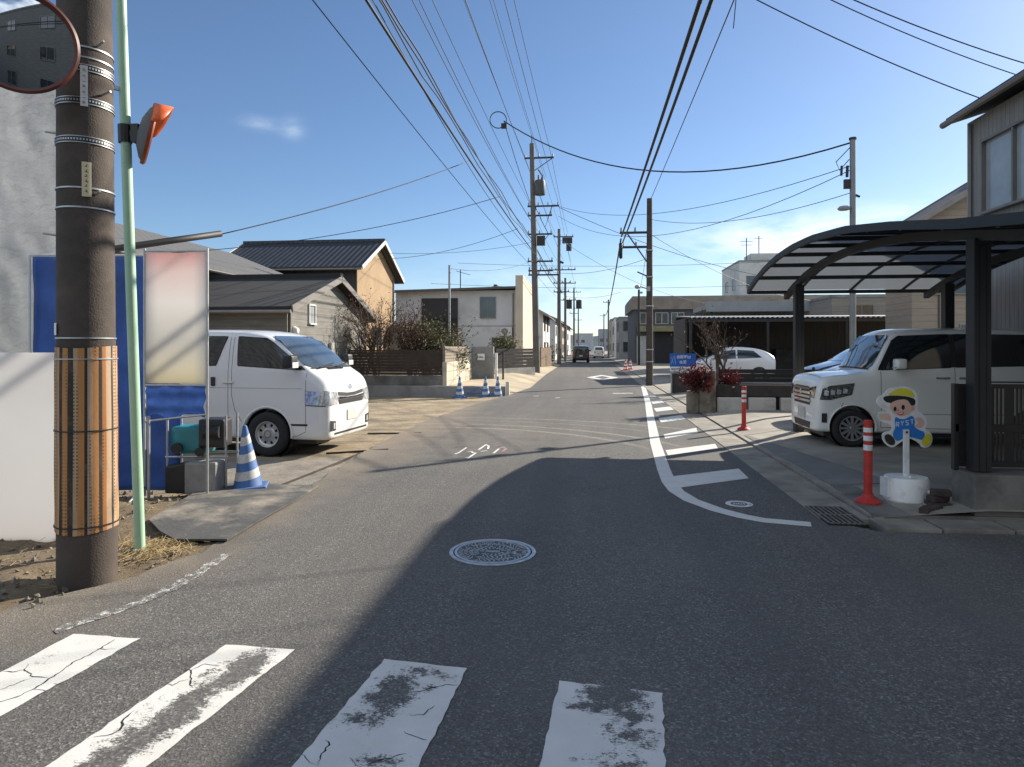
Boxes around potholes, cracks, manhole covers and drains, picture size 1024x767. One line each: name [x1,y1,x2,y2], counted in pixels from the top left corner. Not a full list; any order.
manhole cover [449,539,536,566]
crack [96,711,133,737]
crack [170,664,219,688]
drain grate [805,505,870,528]
crack [0,639,115,702]
